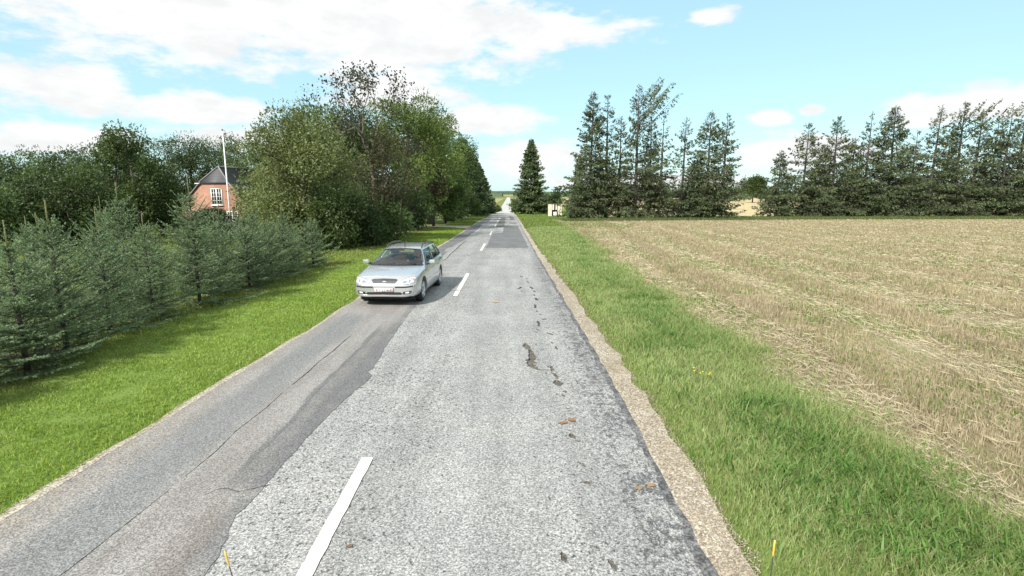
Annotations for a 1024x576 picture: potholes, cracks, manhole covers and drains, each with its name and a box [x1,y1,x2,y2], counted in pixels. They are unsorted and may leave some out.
crack [518,276,582,349]
